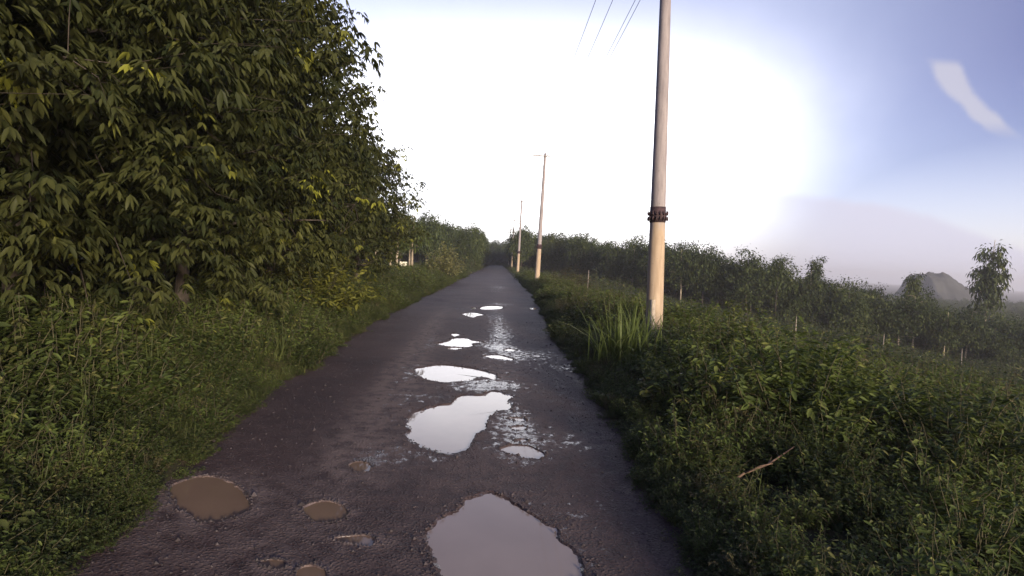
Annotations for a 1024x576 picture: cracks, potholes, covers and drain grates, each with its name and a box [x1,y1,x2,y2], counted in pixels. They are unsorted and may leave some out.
pothole [436,338,483,347]
pothole [303,500,349,522]
pothole [334,534,375,546]
pothole [349,461,372,472]
pothole [168,475,252,523]
pothole [412,364,498,382]
pothole [296,564,327,576]
pothole [259,559,286,569]
pothole [499,444,545,459]
pothole [424,490,586,576]
pothole [402,390,515,455]
